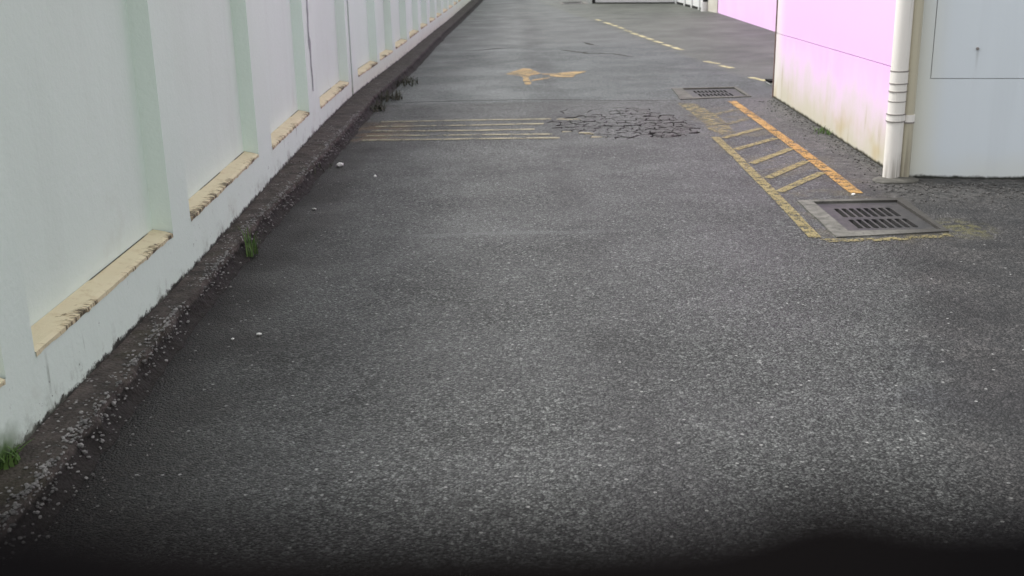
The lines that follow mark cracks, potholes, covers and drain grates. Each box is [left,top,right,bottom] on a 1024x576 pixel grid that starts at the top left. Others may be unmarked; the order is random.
drain grate [797,197,949,238]
crack [547,102,700,140]
drain grate [671,86,751,100]
crack [564,42,631,57]
